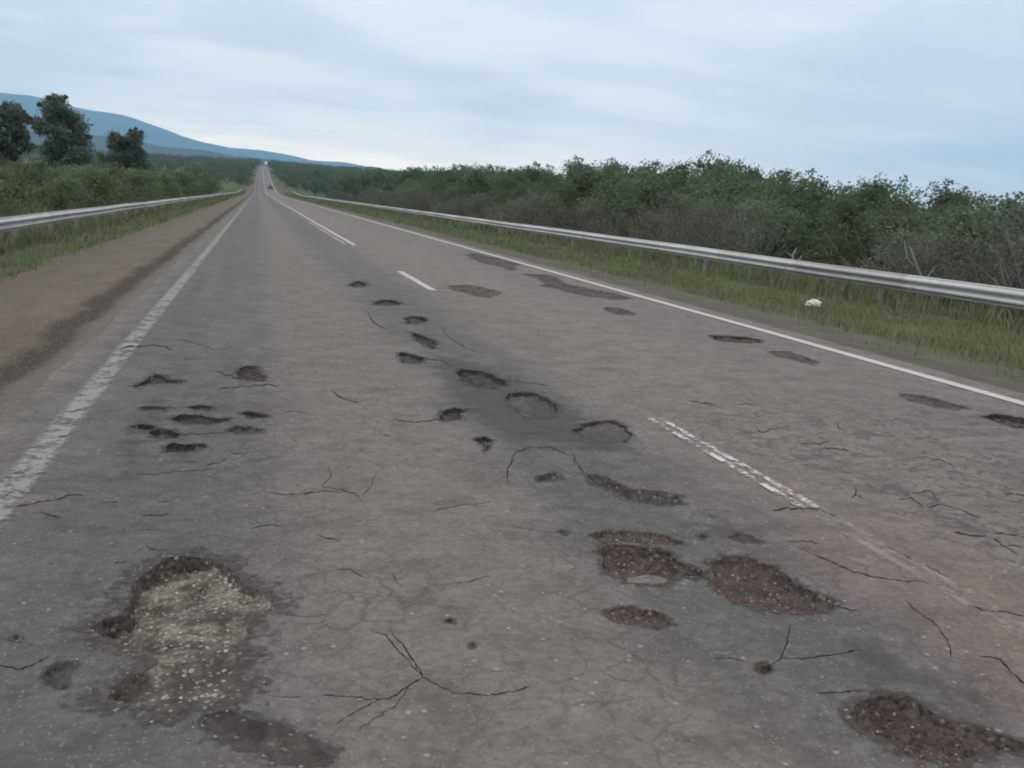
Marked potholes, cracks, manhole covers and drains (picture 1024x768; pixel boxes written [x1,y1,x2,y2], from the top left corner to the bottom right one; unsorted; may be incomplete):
pothole [59,546,302,726]
pothole [161,442,209,453]
pothole [522,274,637,300]
pothole [600,604,677,630]
pothole [236,410,272,418]
pothole [707,335,765,343]
pothole [767,351,818,365]
pothole [192,706,344,768]
pothole [127,373,188,389]
pothole [900,393,966,411]
pothole [584,473,687,506]
pothole [594,541,708,587]
